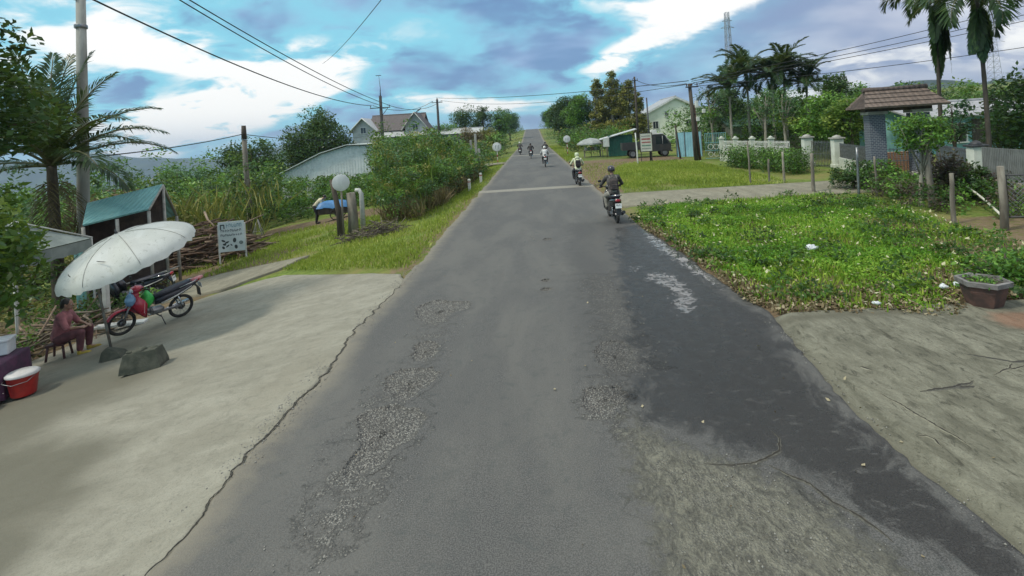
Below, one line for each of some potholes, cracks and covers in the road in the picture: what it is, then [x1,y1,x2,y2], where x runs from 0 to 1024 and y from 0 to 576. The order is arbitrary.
pothole [404,338,446,366]
crack [704,431,782,468]
pothole [334,401,435,484]
crack [880,381,975,448]
pothole [410,298,475,327]
crack [964,353,1024,375]
pothole [587,338,642,377]
pothole [574,382,637,418]
pothole [376,364,446,404]
